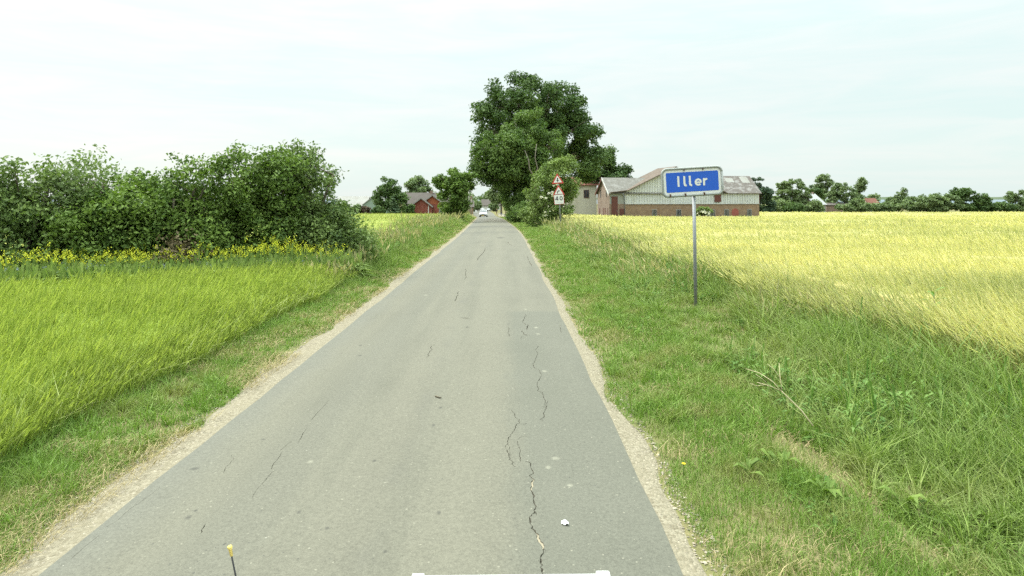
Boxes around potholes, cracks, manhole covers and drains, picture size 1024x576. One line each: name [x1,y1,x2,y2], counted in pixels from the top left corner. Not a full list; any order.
crack [521,314,548,420]
crack [505,410,546,574]
